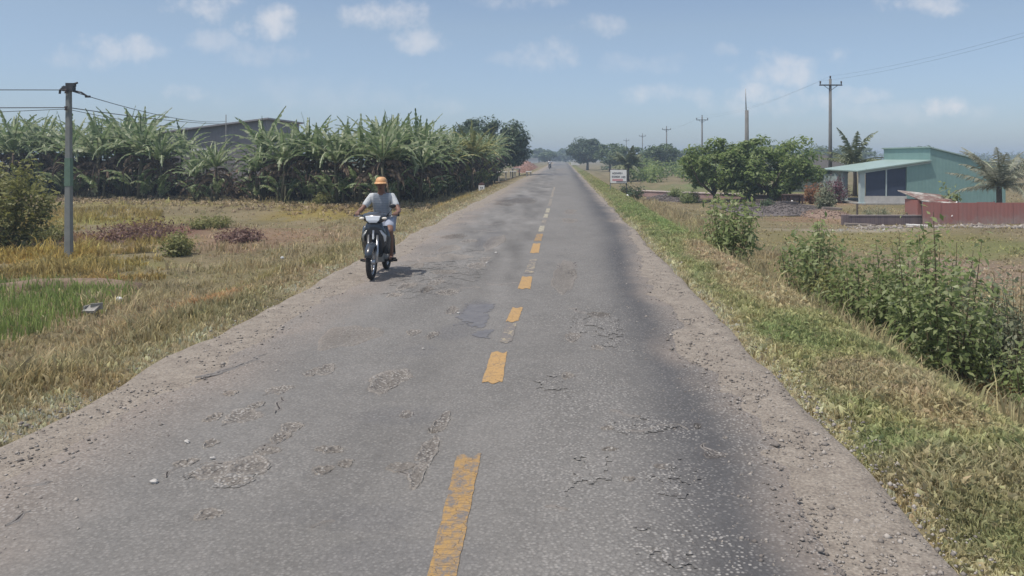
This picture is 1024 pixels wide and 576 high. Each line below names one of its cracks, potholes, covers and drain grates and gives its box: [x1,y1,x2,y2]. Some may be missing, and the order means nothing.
pothole [280,422,305,433]
crack [610,409,728,455]
pothole [407,463,428,490]
pothole [431,410,451,433]
pothole [221,408,264,423]
crack [165,353,304,486]
pothole [367,368,414,394]
pothole [270,431,292,444]
pothole [414,435,440,466]
